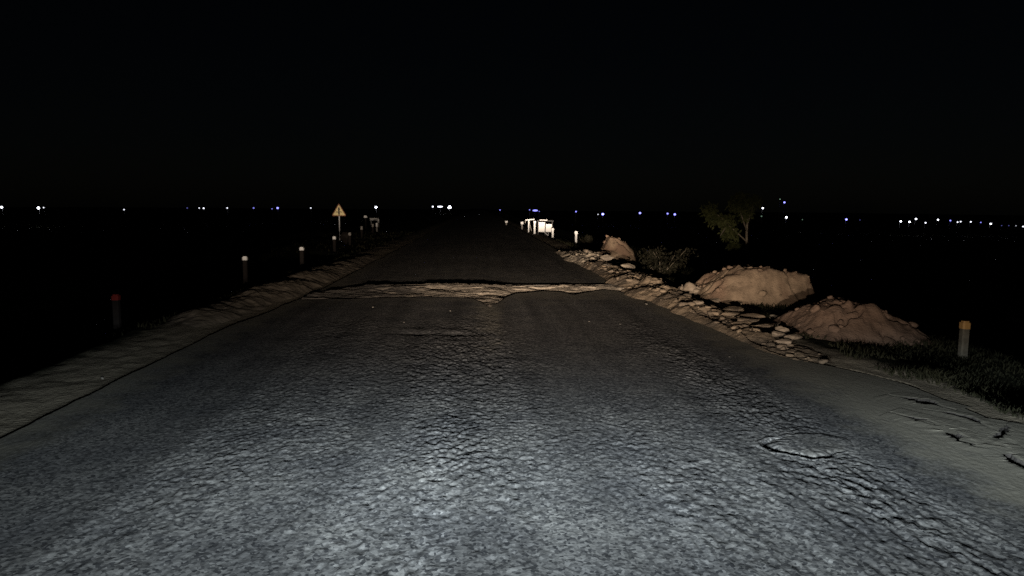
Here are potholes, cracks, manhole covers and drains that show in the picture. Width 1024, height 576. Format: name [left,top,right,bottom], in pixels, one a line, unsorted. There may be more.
pothole [755,433,855,461]
crack [874,392,1024,478]
